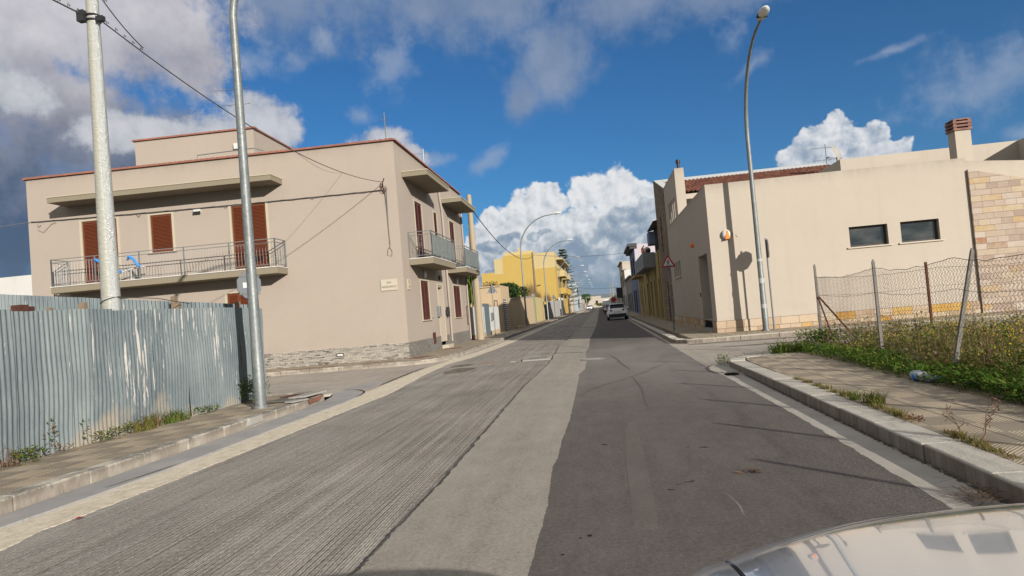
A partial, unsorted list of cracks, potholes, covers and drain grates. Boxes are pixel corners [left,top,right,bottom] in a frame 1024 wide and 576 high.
crack [609,355,648,406]
